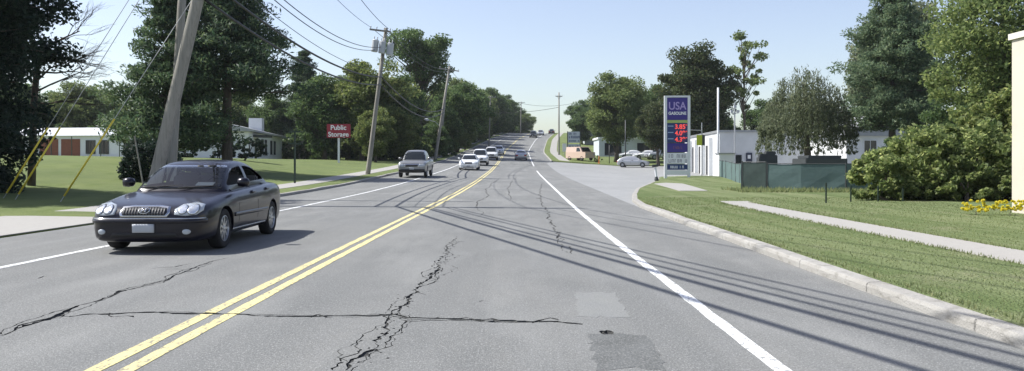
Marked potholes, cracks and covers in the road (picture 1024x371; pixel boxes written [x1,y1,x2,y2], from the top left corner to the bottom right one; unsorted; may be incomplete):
crack [540,188,572,254]
crack [0,260,580,336]
